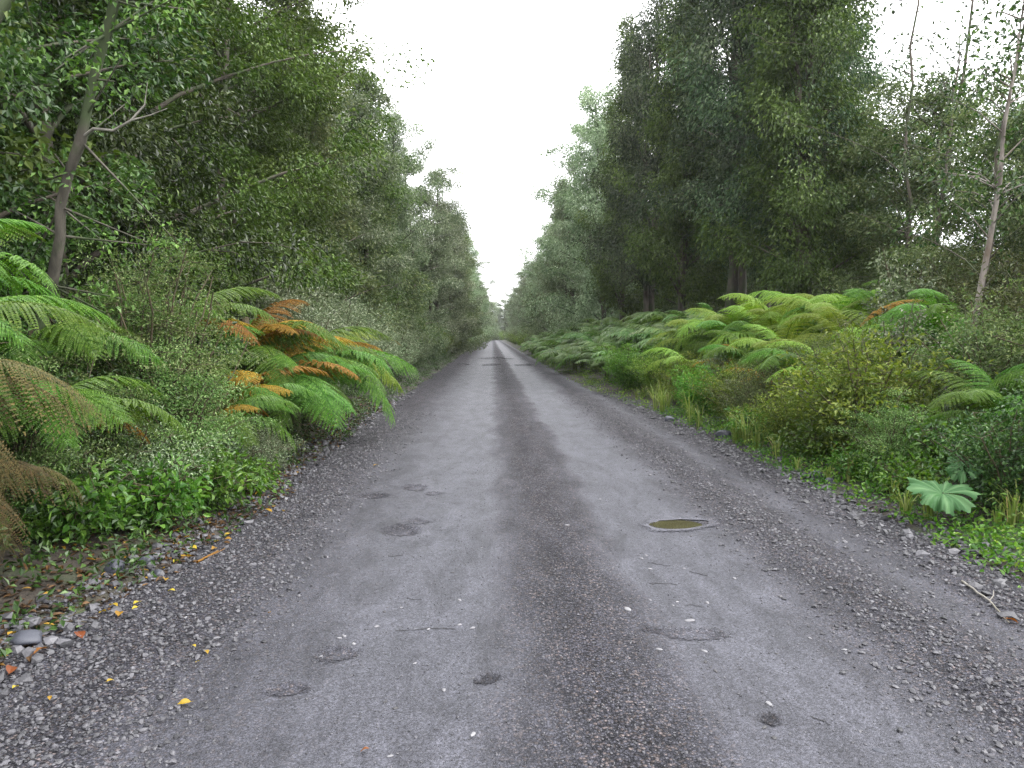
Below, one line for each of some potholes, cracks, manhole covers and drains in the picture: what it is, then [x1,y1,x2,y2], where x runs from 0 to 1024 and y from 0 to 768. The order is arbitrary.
pothole [640,517,723,532]
pothole [382,523,421,536]
pothole [475,673,500,684]
pothole [314,645,361,662]
pothole [267,681,311,696]
pothole [760,713,781,726]
